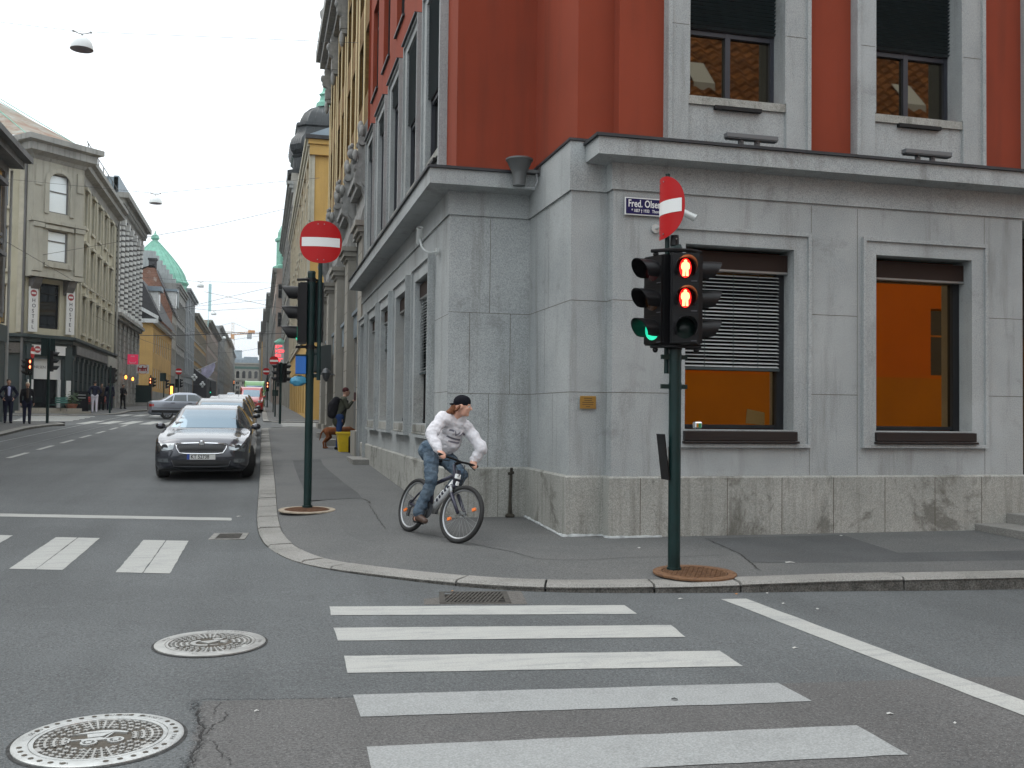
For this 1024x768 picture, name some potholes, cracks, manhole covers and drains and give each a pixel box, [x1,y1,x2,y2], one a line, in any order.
manhole cover [6,713,188,768]
drain grate [424,591,527,605]
crack [186,705,231,768]
manhole cover [151,630,268,658]
